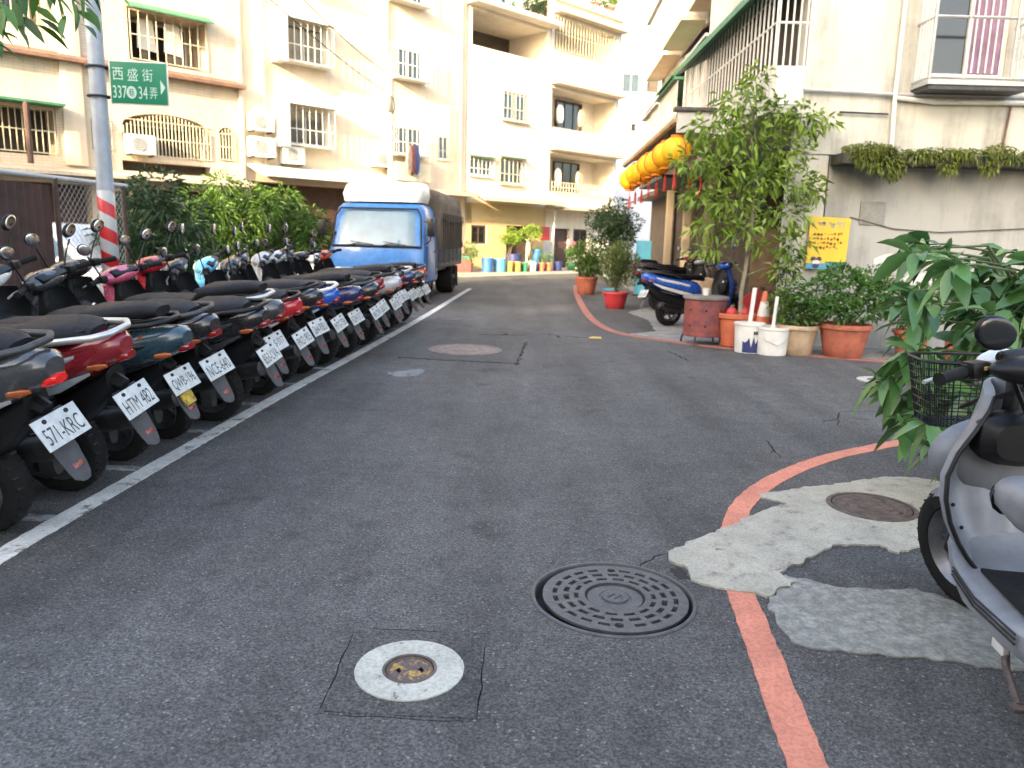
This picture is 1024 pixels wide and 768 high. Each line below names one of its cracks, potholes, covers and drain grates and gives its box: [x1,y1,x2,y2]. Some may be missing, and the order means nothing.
manhole cover [354,640,464,702]
manhole cover [531,562,697,639]
manhole cover [428,344,502,355]
manhole cover [826,492,919,522]
